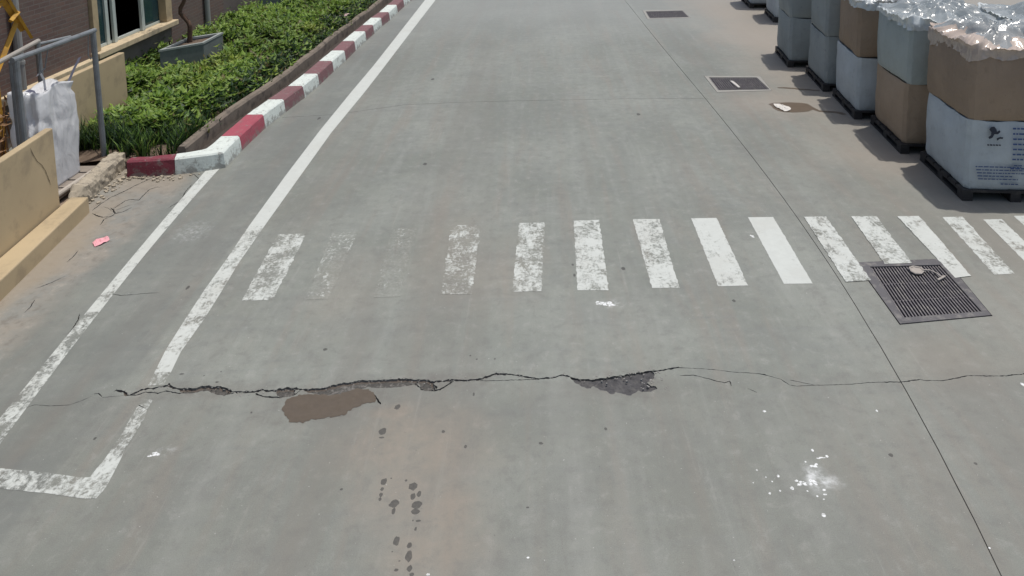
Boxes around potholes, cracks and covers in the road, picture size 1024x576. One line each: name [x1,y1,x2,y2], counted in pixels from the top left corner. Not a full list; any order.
drain grate [642,10,690,19]
drain grate [704,76,772,92]
pothole [571,371,657,396]
drain grate [859,259,992,325]
crack [92,176,157,225]
crack [96,367,1024,404]
